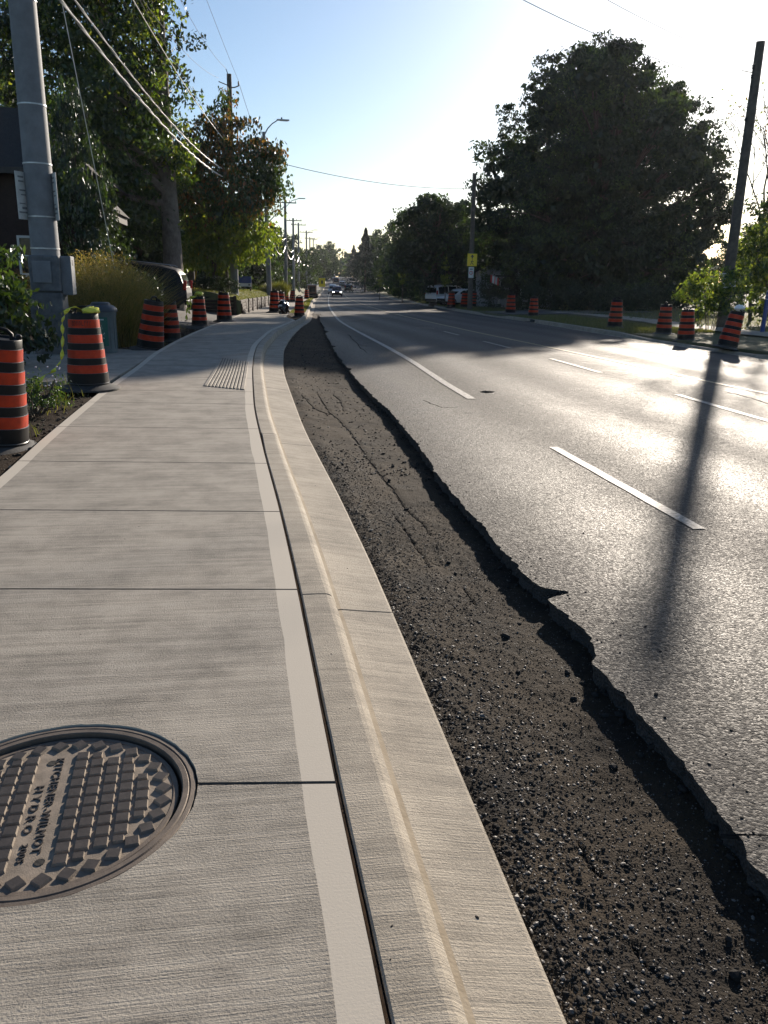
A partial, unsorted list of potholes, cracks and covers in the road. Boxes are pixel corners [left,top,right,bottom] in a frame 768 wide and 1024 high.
crack [305,394,430,568]
manhole cover [0,726,197,907]
